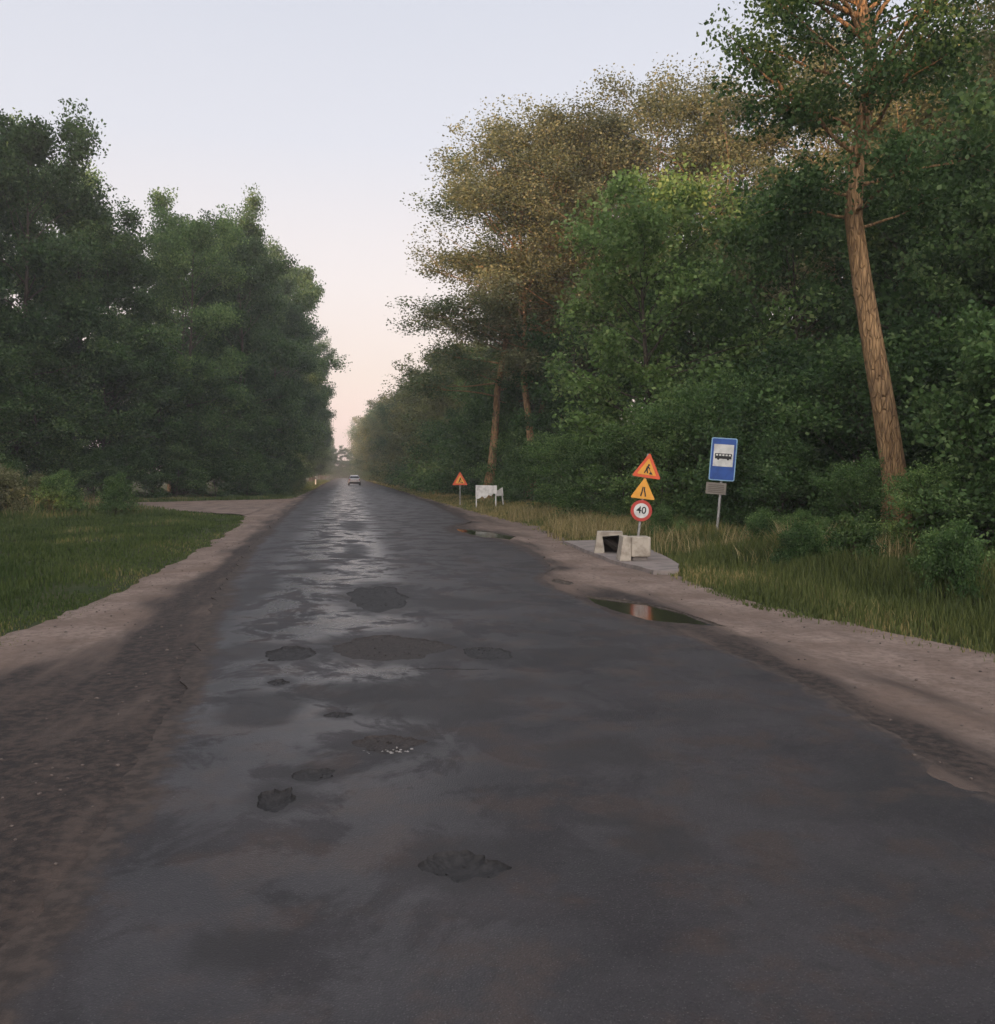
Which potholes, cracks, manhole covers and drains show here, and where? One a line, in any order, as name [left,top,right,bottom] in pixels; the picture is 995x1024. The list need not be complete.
pothole [291,768,336,781]
pothole [257,787,296,813]
pothole [346,586,409,613]
pothole [455,528,516,540]
pothole [418,849,512,883]
pothole [265,646,317,661]
pothole [584,595,727,627]
pothole [463,647,513,660]
